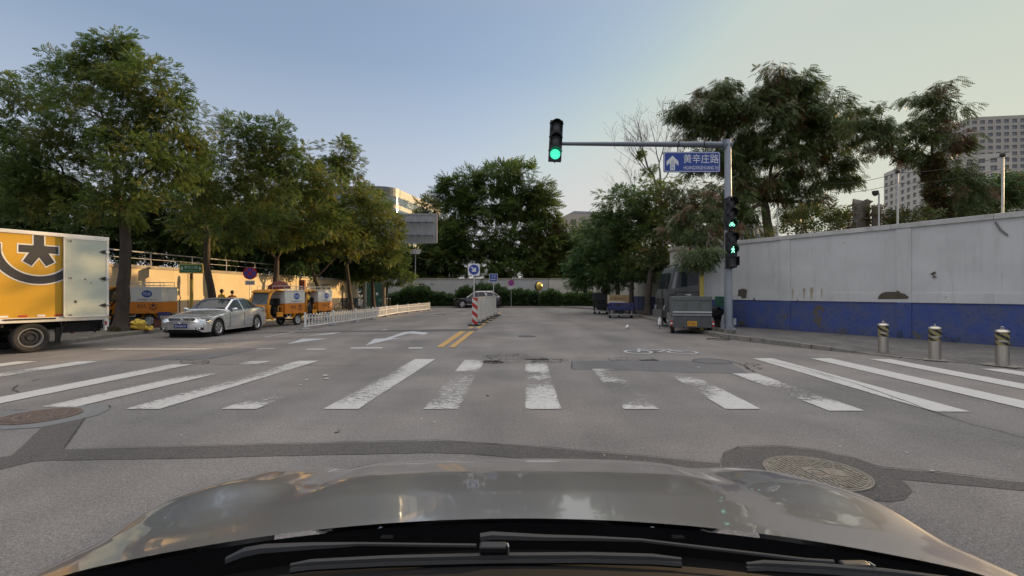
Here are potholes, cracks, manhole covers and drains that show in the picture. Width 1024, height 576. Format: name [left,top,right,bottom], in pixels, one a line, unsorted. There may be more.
manhole cover [763,456,875,492]
manhole cover [0,408,83,425]
